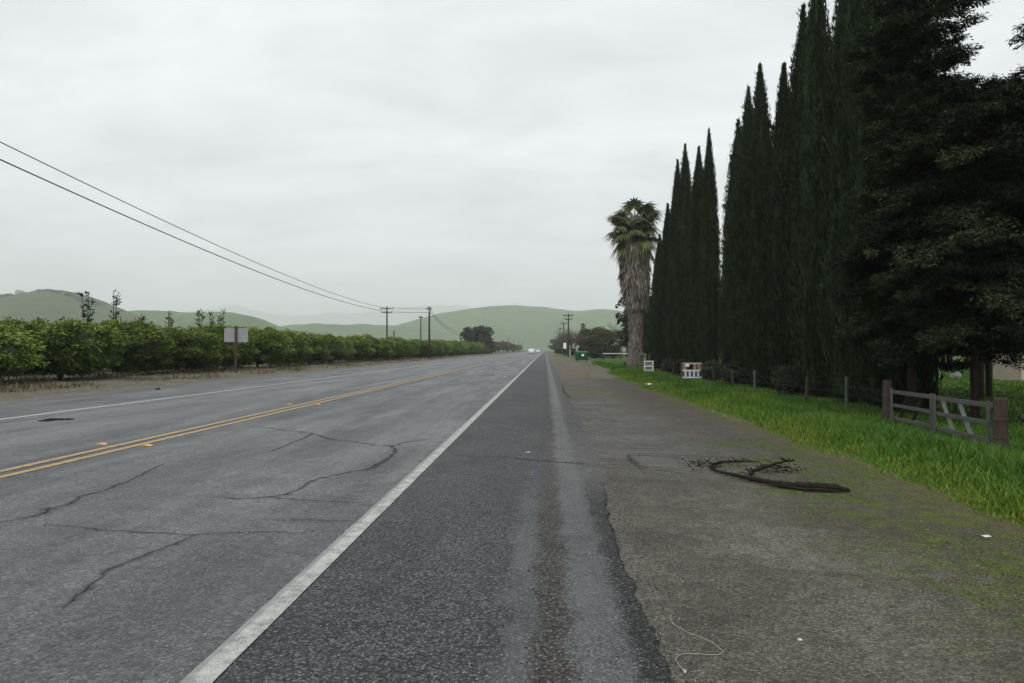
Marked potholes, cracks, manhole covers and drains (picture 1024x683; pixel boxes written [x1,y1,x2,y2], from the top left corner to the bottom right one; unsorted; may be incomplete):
crack [226,428,439,503]
crack [485,453,714,473]
crack [15,465,160,520]
crack [44,519,346,608]
